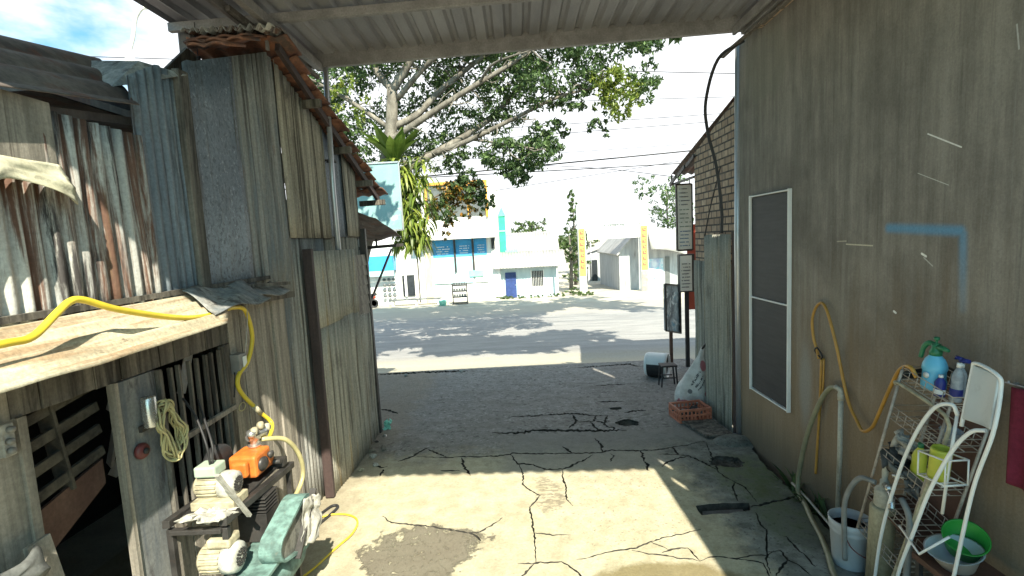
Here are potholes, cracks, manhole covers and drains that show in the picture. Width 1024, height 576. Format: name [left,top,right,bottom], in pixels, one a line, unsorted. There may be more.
pothole [709,456,745,469]
crack [376,384,815,576]
